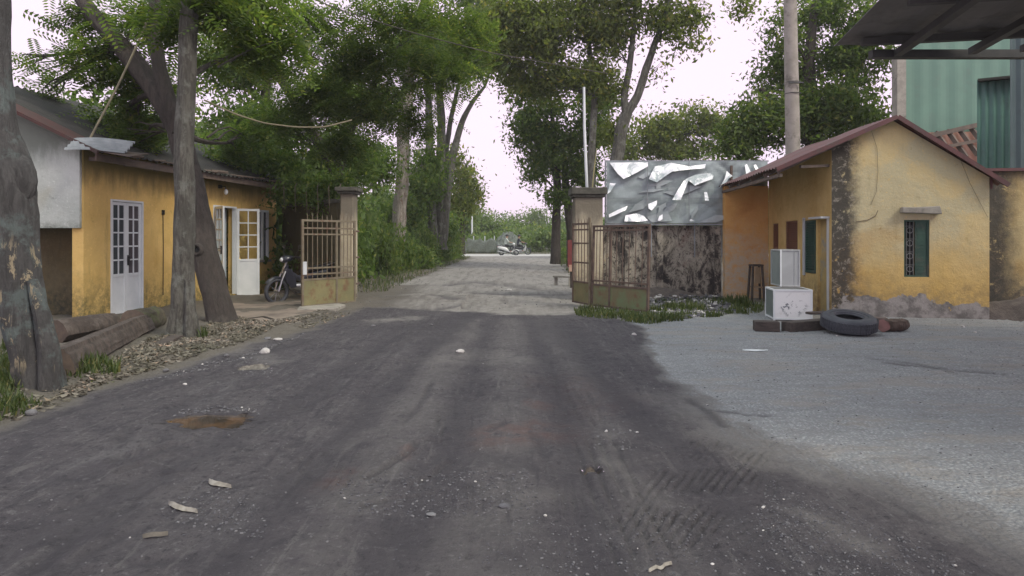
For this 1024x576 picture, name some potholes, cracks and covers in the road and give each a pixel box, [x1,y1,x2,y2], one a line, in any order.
pothole [148,411,268,431]
